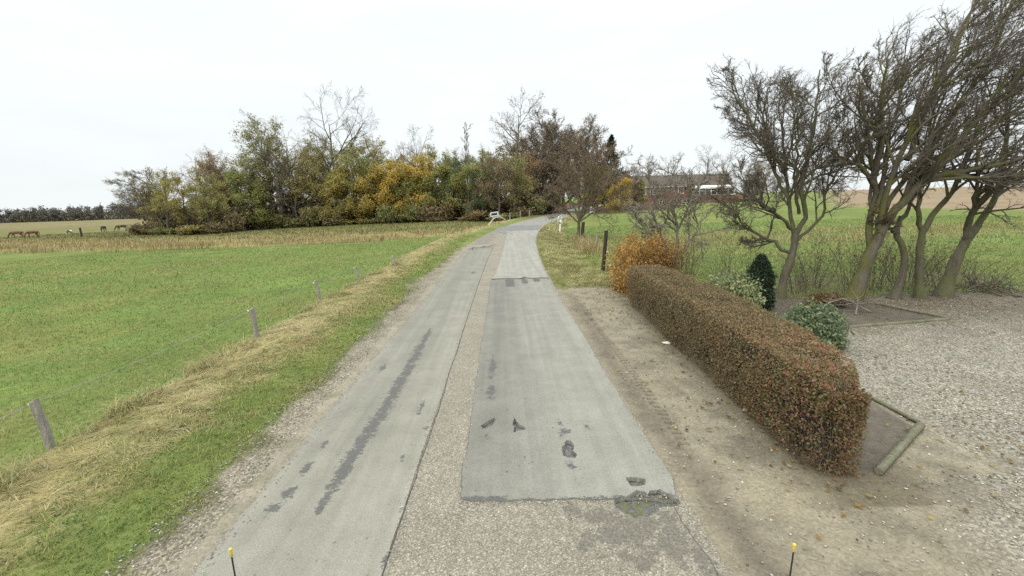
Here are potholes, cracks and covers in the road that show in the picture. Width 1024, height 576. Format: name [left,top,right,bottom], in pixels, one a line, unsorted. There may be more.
pothole [626,477,646,486]
pothole [562,440,577,458]
pothole [613,489,680,518]
